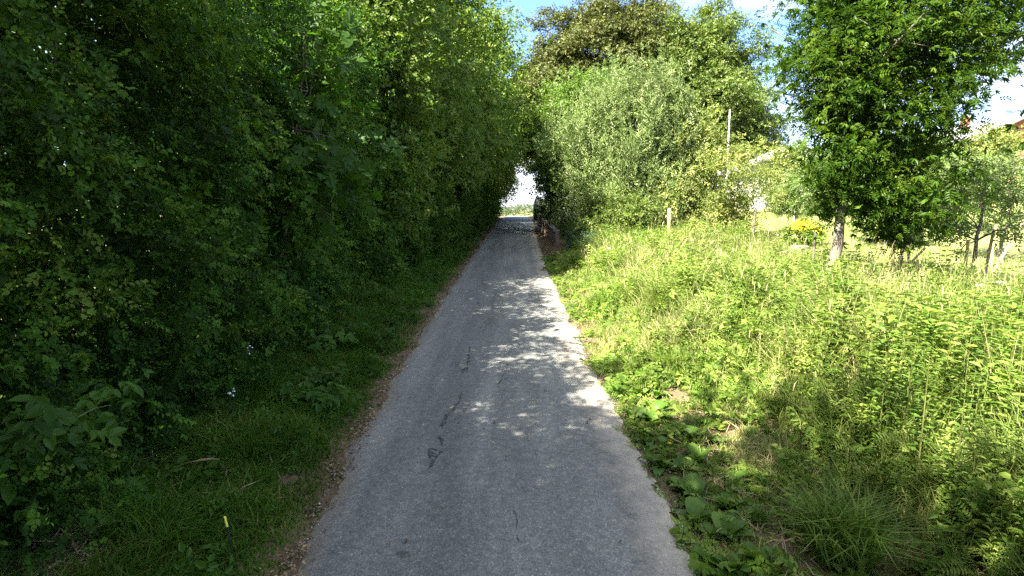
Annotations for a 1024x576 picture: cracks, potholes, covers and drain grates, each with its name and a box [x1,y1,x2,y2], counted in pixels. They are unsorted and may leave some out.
crack [427,346,470,470]
